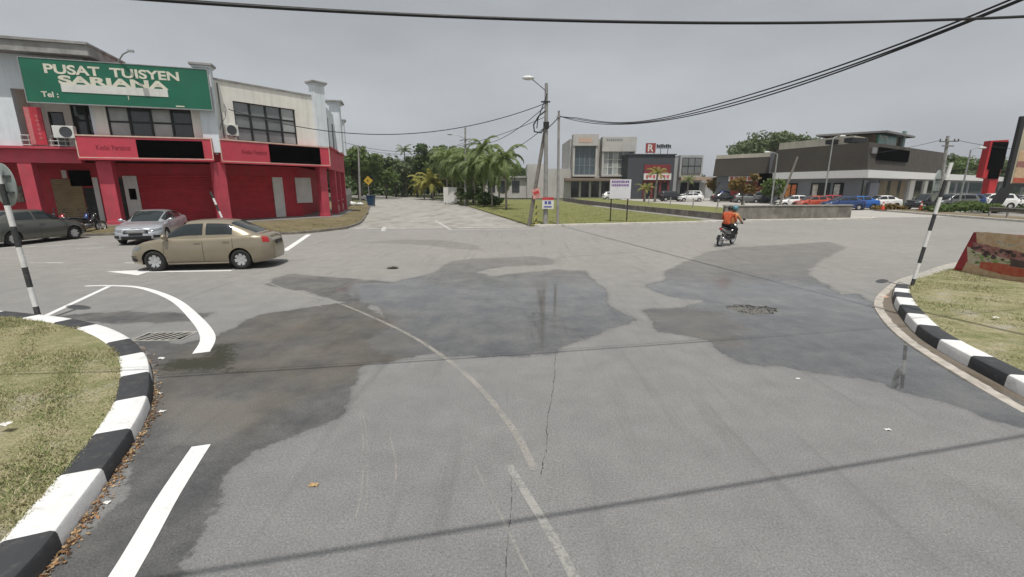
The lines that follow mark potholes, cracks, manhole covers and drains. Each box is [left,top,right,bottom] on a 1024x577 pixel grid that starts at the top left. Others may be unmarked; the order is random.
pothole [726,304,779,315]
drain grate [132,331,198,341]
